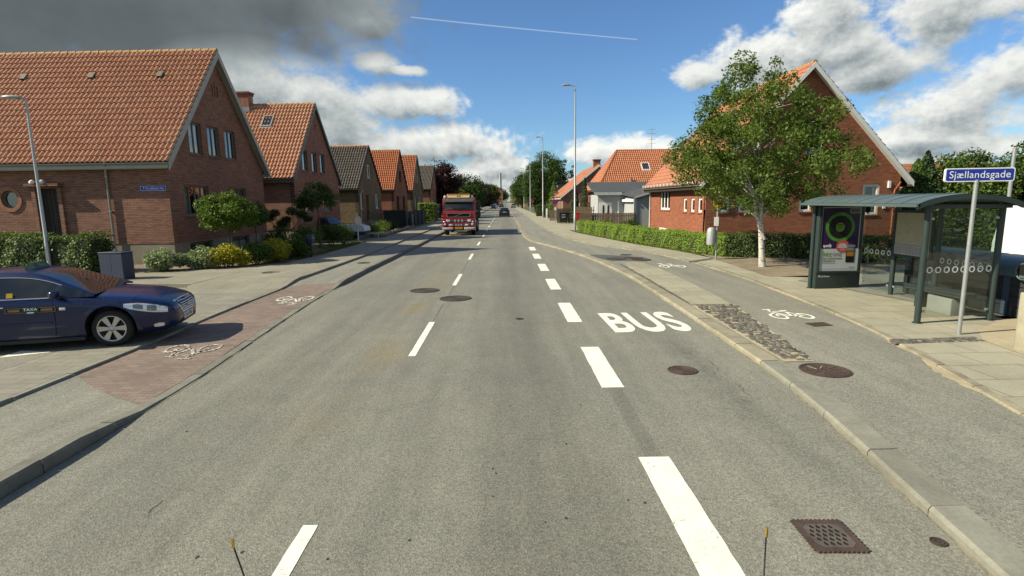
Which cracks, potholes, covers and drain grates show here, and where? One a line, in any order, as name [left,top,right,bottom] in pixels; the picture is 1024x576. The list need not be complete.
manhole cover [799,363,853,378]
manhole cover [667,366,698,375]
utility cover [929,537,948,547]
